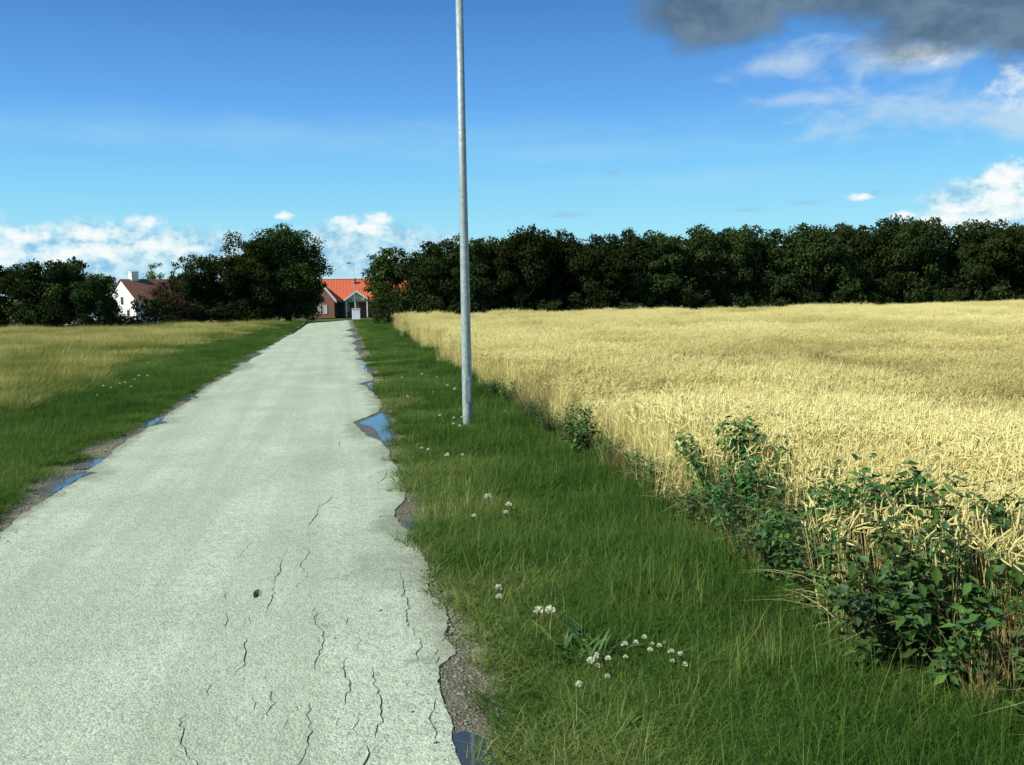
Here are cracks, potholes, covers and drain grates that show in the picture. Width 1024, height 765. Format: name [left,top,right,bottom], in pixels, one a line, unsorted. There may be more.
pothole [355,411,399,446]
crack [336,618,384,765]
crack [252,691,314,765]
pothole [73,458,104,469]
pothole [439,645,515,765]
crack [179,714,198,765]
pothole [33,471,97,498]
crack [223,496,337,671]
